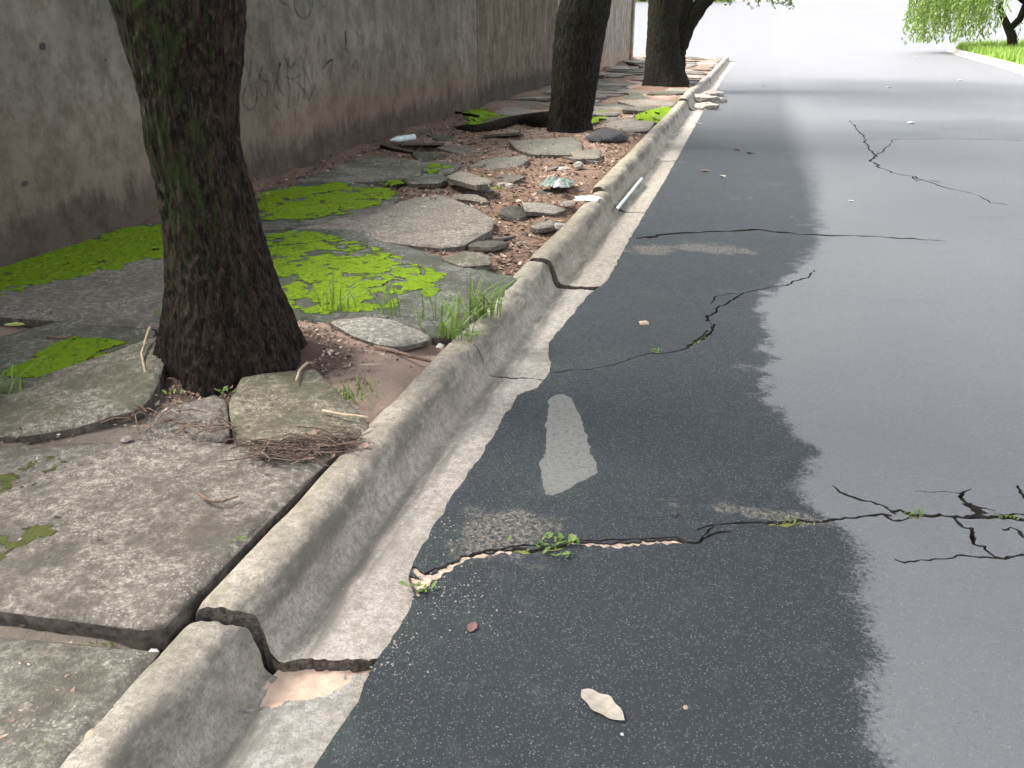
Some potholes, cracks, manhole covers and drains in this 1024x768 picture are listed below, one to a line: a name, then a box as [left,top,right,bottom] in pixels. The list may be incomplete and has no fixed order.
pothole [243,669,371,712]
crack [409,485,1024,596]
crack [849,120,1017,205]
crack [640,229,940,241]
crack [550,270,815,373]
